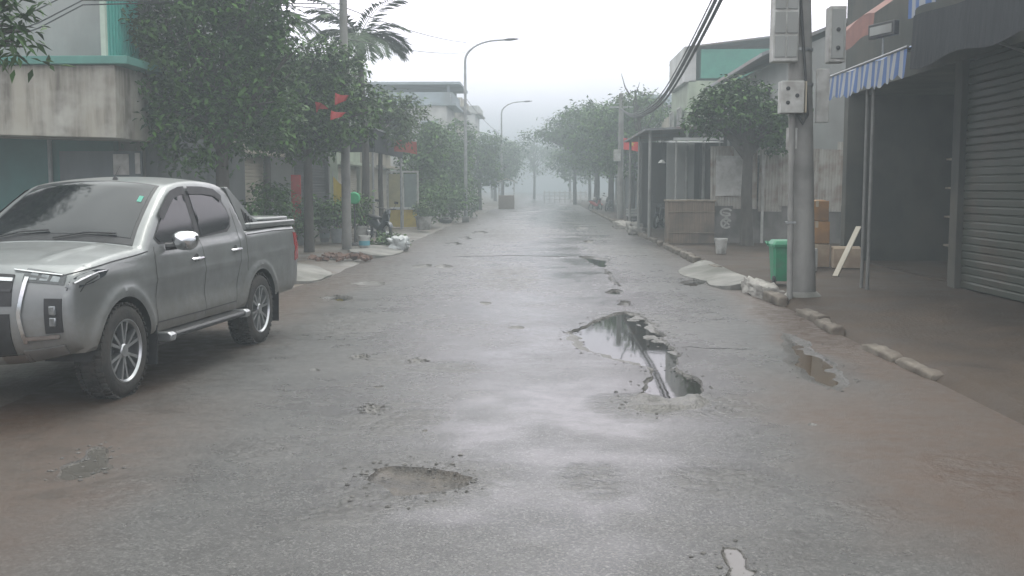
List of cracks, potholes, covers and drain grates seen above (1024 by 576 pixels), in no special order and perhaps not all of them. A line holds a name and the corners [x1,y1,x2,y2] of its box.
pothole [689,539,767,576]
pothole [343,454,484,510]
pothole [45,442,126,484]
pothole [357,402,392,415]
pothole [779,332,860,392]
pothole [560,311,728,419]
